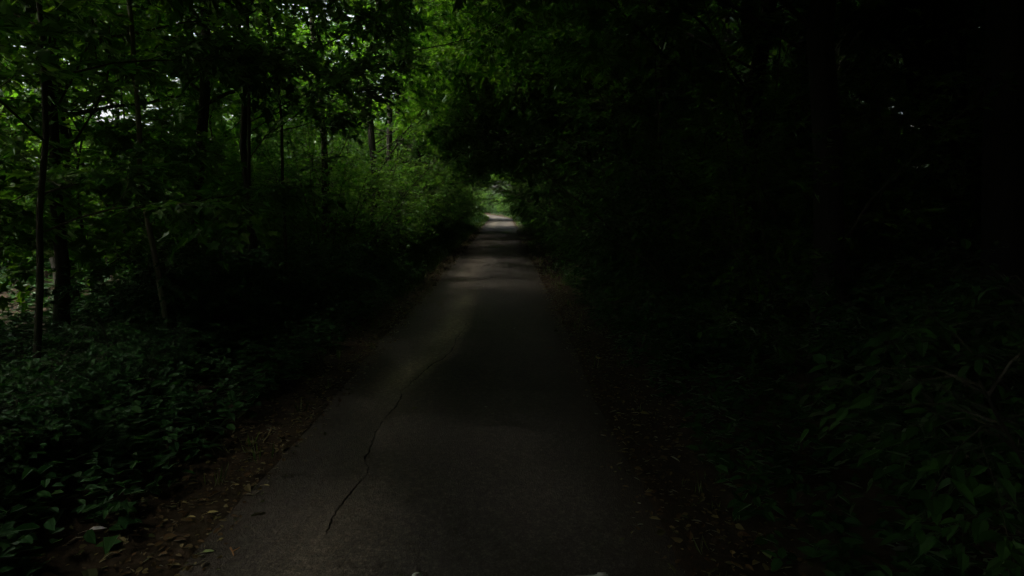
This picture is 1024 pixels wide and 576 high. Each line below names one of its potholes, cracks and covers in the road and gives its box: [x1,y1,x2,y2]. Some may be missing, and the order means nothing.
crack [326,323,467,534]
